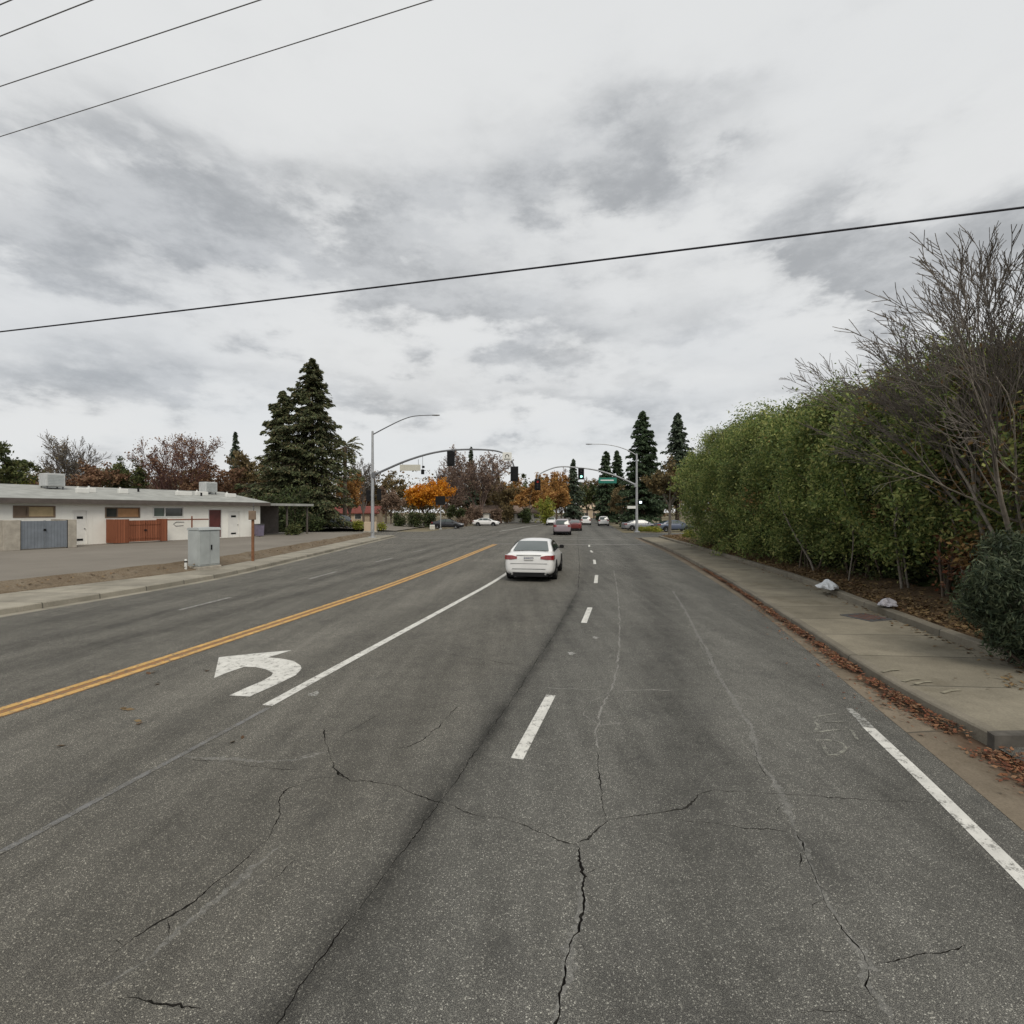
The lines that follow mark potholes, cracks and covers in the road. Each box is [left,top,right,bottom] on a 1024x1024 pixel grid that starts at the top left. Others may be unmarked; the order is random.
crack [87,572,962,1024]
